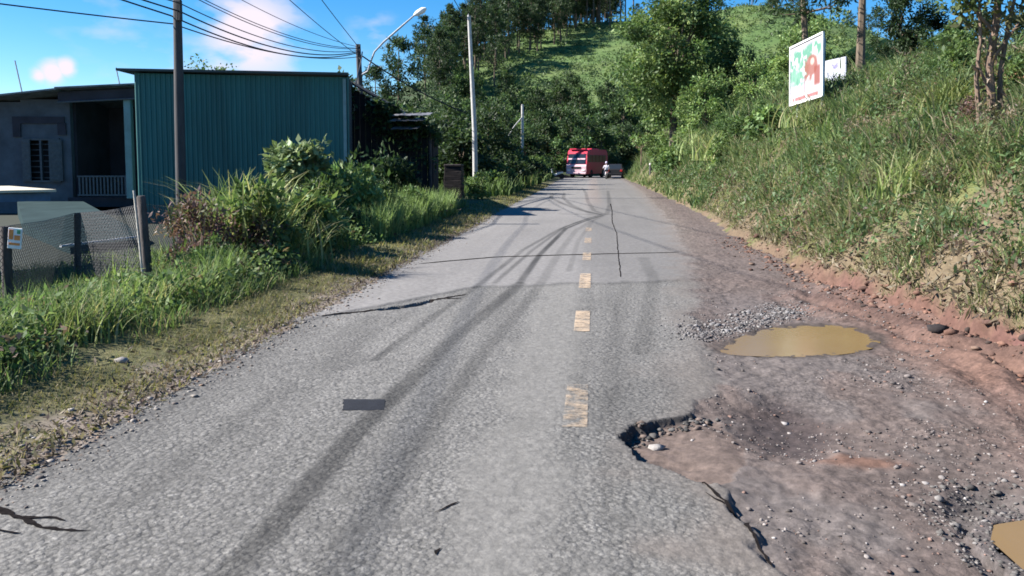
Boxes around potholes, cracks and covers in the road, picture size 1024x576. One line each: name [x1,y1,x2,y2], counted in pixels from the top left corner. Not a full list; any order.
pothole [618,415,751,485]
pothole [732,394,841,460]
crack [702,482,773,566]
crack [419,204,671,277]
pothole [698,320,904,362]
crack [0,507,86,533]
